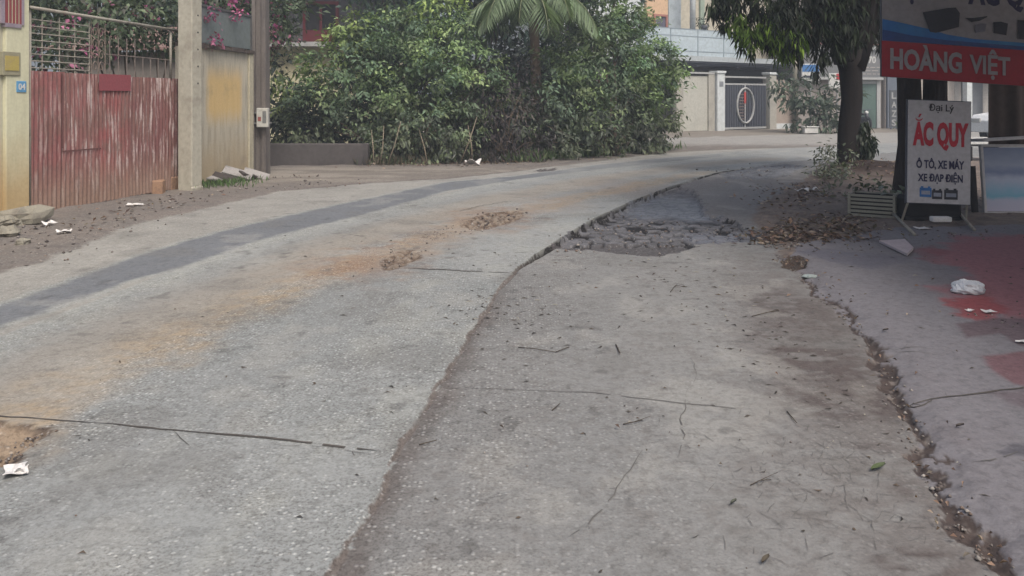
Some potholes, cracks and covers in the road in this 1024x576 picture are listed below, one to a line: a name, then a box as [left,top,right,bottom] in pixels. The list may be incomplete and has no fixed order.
pothole [380,250,423,271]
crack [440,352,732,456]
pothole [460,211,523,231]
pothole [551,187,769,257]
crack [571,451,642,535]
pothole [781,255,808,271]
